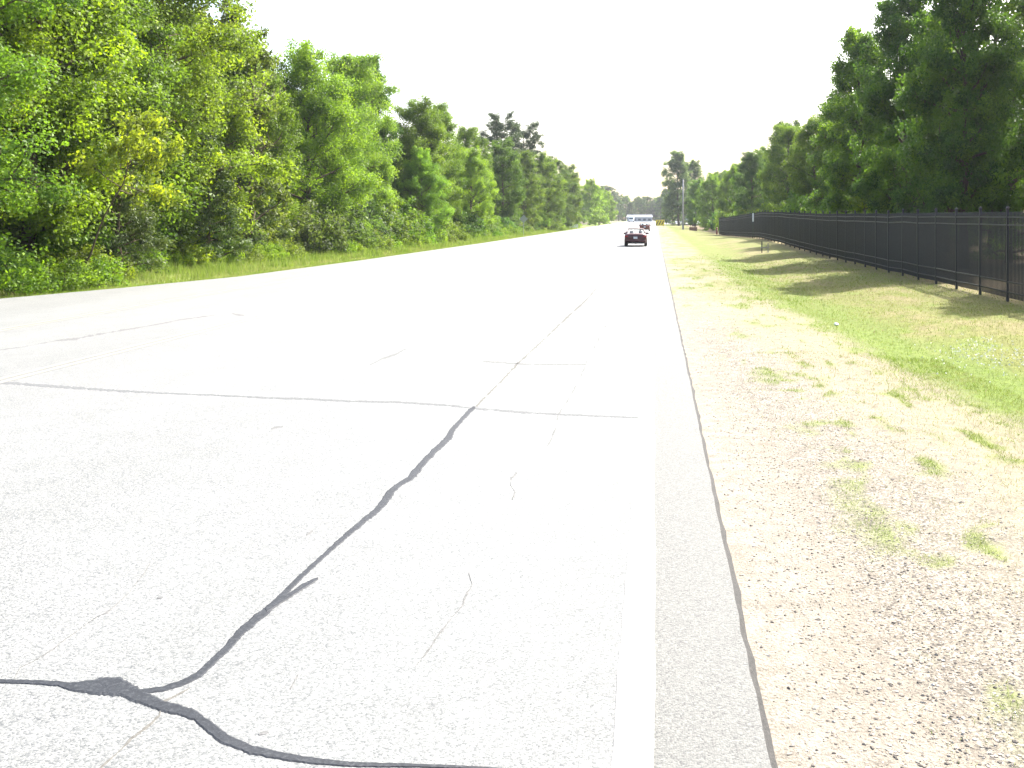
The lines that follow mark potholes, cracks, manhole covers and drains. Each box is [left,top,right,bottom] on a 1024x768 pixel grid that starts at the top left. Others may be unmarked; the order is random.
crack [415,572,472,667]
